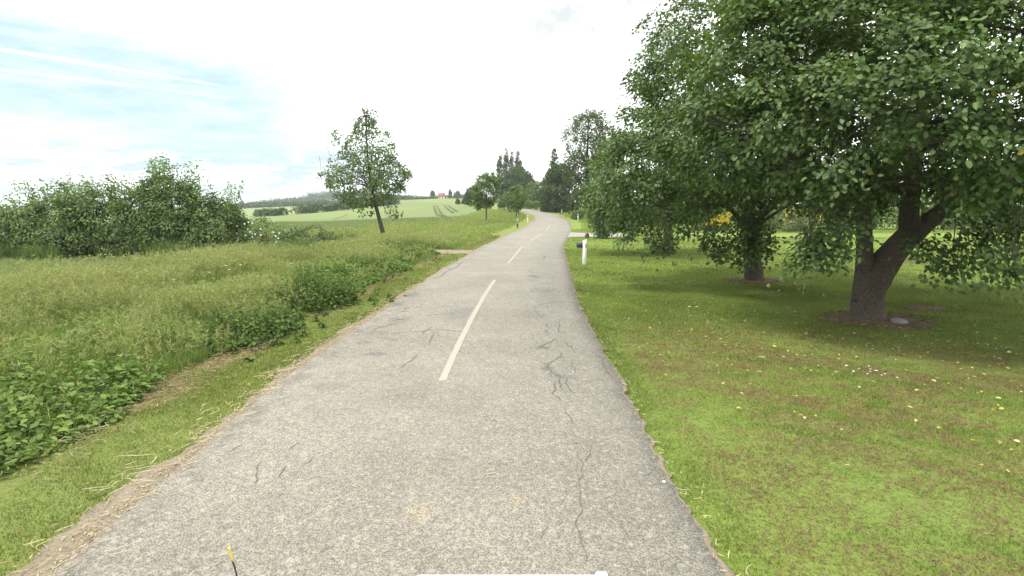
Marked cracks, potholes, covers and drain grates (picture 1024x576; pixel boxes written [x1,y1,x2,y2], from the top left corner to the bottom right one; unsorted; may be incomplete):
crack [530,255,576,437]
crack [342,299,472,367]
crack [574,449,591,562]
